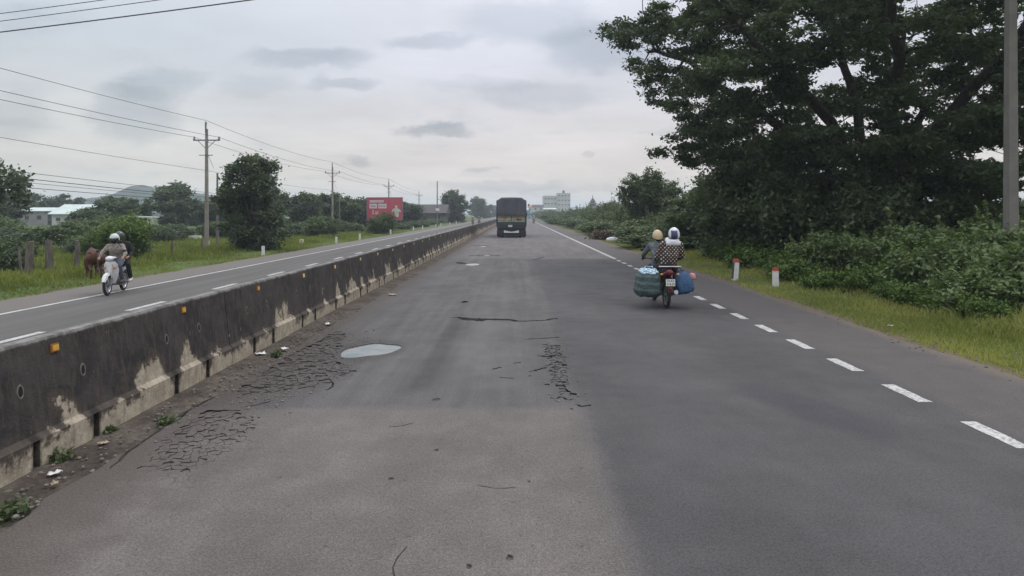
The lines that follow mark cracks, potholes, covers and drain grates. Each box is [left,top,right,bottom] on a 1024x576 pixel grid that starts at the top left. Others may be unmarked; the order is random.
crack [452,317,558,339]
crack [493,356,591,407]
crack [109,332,355,474]
pothole [341,343,402,358]
crack [392,546,407,576]
